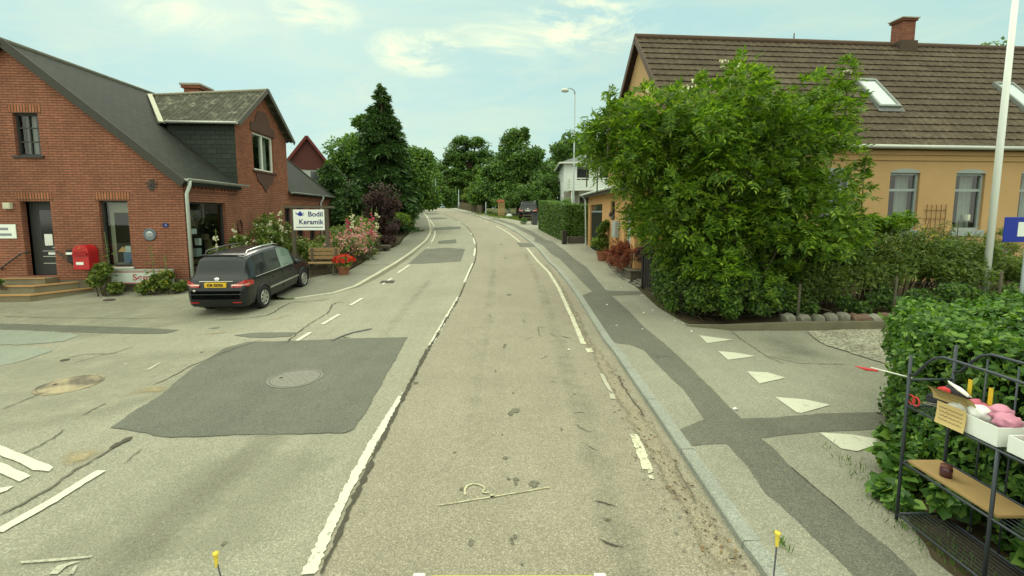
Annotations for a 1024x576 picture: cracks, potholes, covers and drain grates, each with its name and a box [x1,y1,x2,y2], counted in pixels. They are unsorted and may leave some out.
manhole cover [32,375,105,395]
crack [208,299,345,342]
crack [156,339,263,384]
crack [618,376,645,417]
manhole cover [266,369,323,388]
